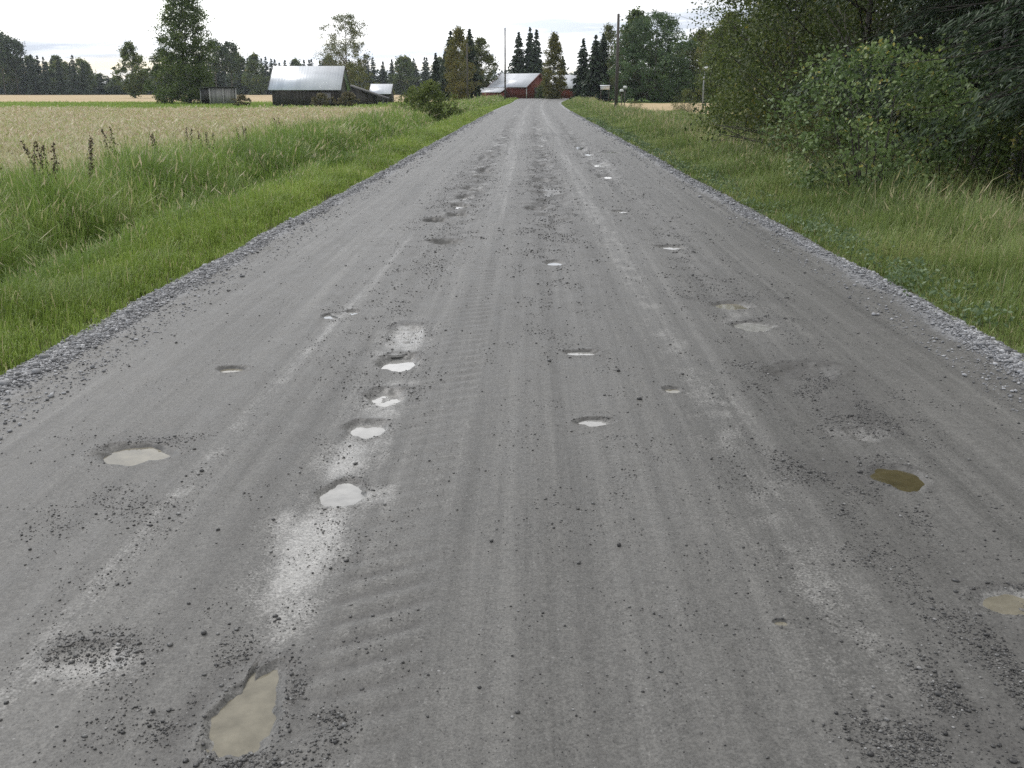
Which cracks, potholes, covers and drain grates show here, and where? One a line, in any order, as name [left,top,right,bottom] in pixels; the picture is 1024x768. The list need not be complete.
pothole [843,457,954,502]
pothole [372,316,441,357]
